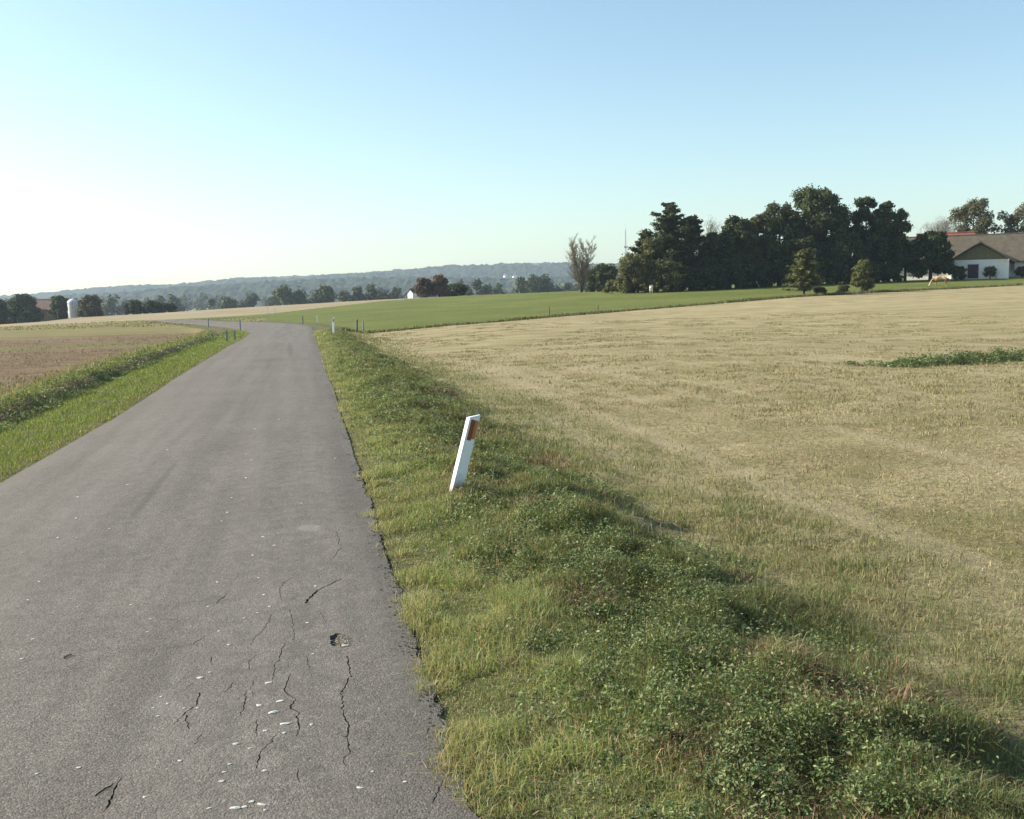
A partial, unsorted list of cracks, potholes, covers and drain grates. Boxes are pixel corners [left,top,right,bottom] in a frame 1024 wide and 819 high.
crack [173,683,203,743]
pothole [329,633,352,648]
crack [340,656,352,766]
crack [224,578,341,768]
crack [103,776,122,812]
